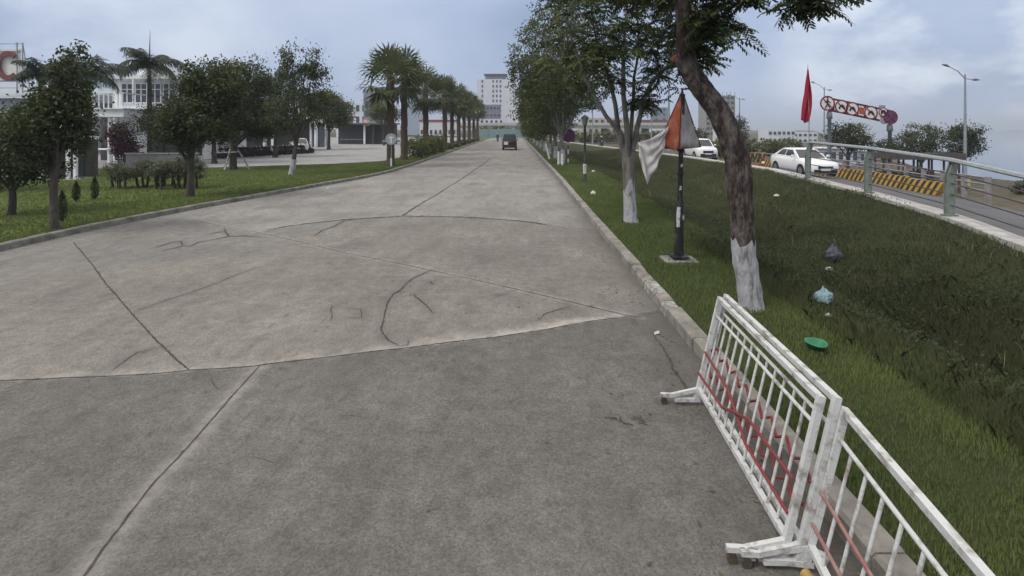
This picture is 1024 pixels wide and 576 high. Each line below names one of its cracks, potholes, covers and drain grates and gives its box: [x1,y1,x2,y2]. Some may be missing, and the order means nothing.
crack [380,271,433,346]
crack [653,334,688,389]
